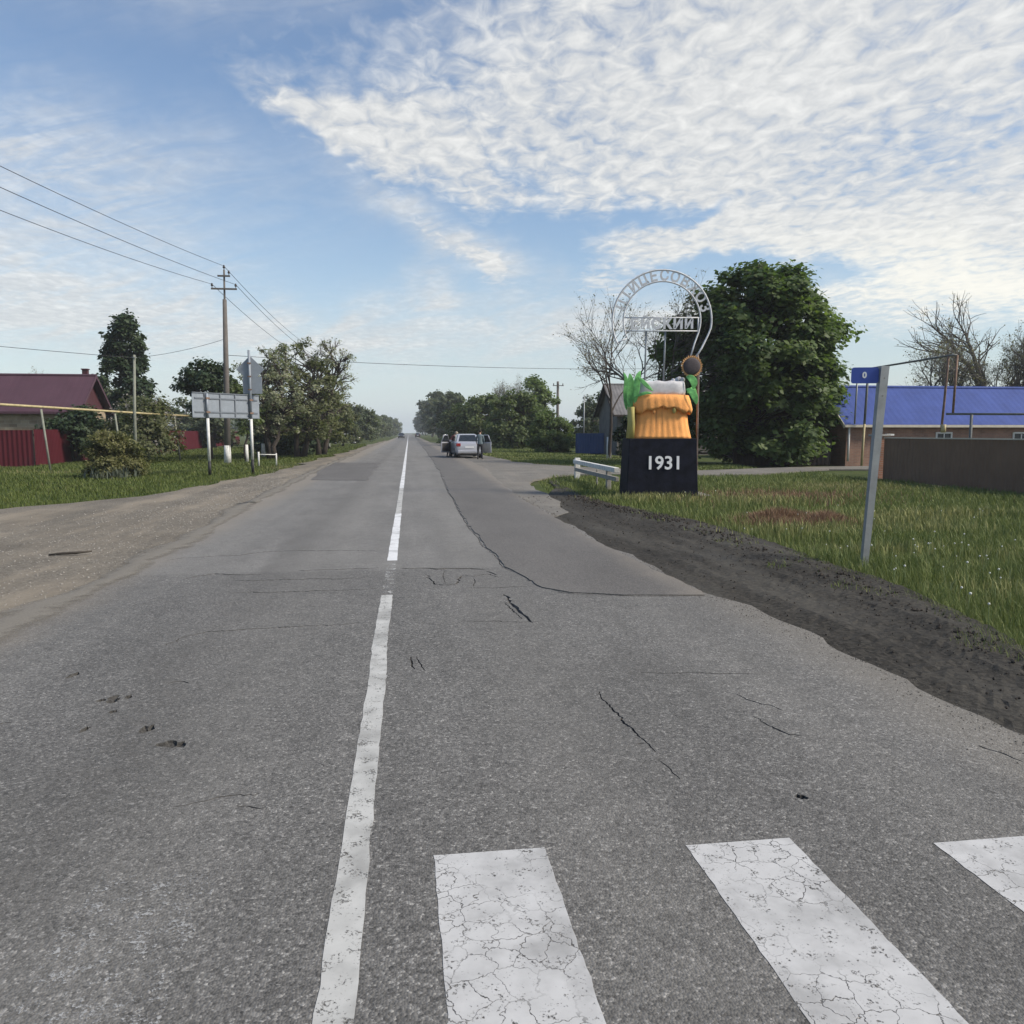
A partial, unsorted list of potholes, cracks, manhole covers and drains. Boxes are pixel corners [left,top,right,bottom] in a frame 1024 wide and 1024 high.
crack [598,692,680,779]
crack [166,623,353,645]
pothole [155,740,186,748]
crack [173,793,262,809]
crack [425,478,533,623]
crack [737,694,804,736]
